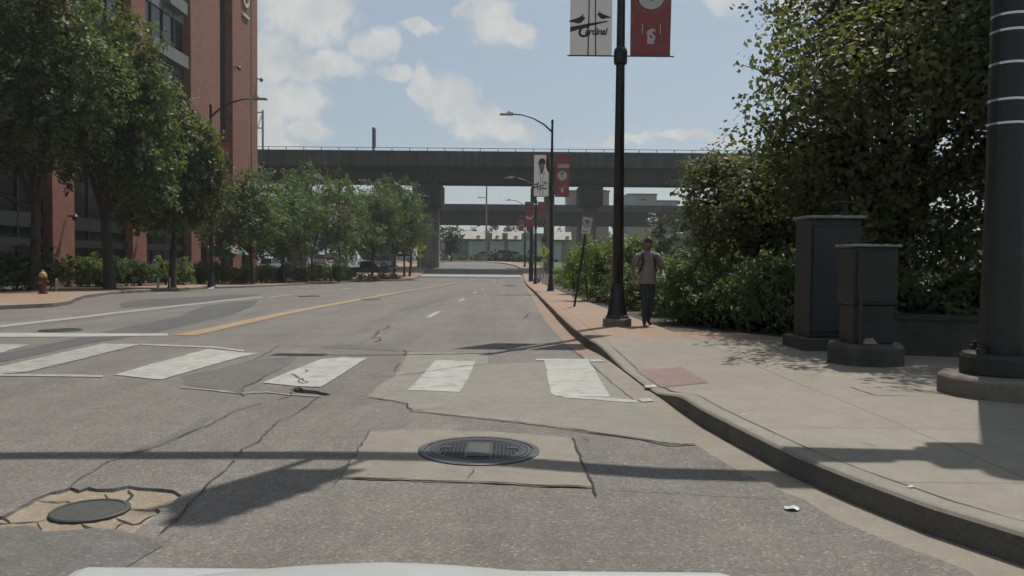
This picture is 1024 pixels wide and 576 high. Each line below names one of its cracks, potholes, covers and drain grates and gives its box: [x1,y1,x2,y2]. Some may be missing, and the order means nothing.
manhole cover [418,436,539,466]
crack [0,344,322,533]
manhole cover [48,498,131,525]
